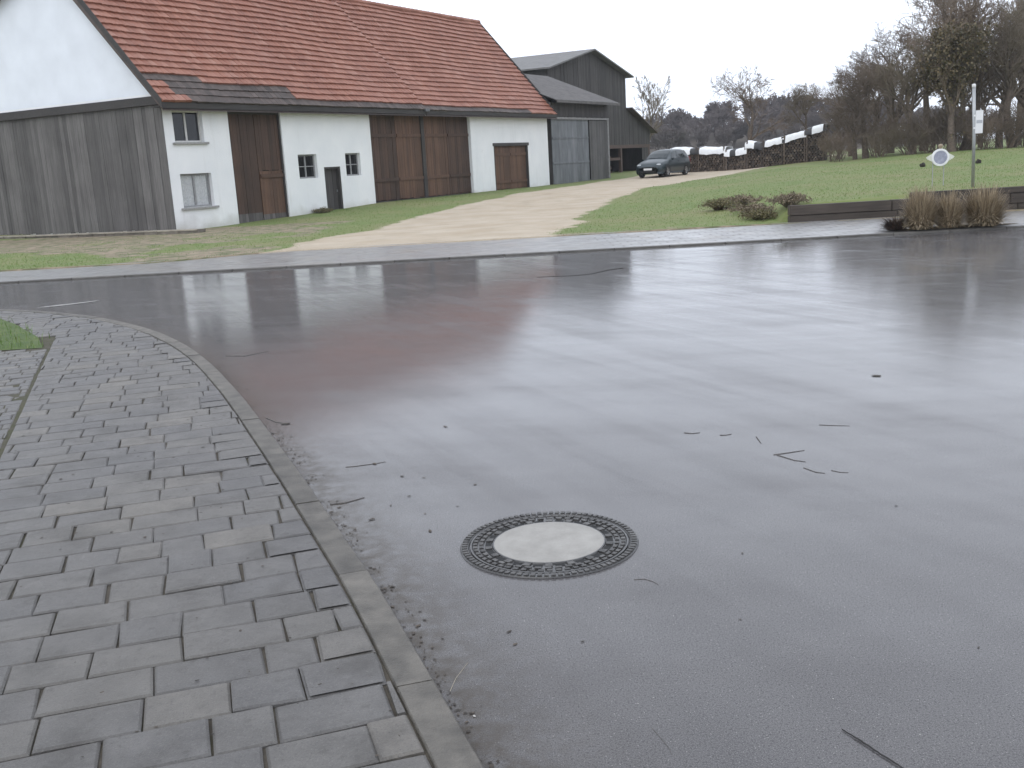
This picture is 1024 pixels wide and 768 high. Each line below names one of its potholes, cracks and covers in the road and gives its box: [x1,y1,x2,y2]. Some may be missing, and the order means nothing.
manhole cover [460,511,639,579]
